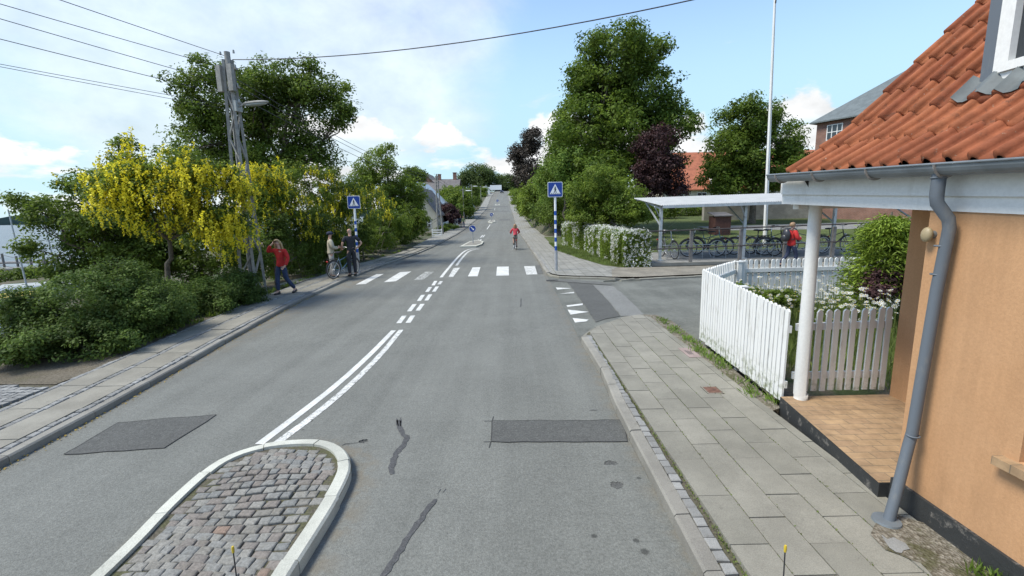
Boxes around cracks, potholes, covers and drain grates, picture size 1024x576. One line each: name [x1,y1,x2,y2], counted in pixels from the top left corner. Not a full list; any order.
manhole cover [701,386,725,394]
manhole cover [678,348,701,358]
